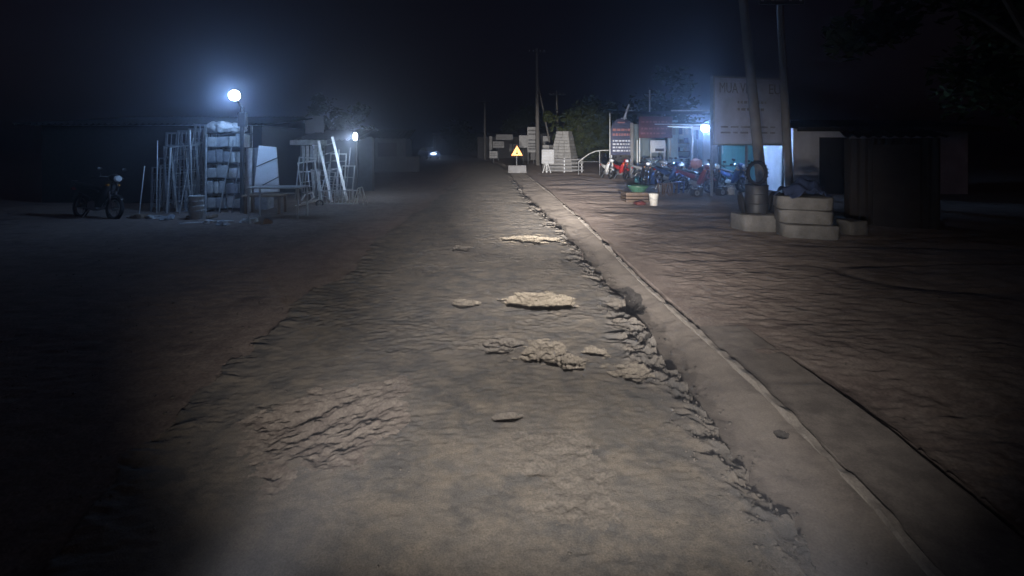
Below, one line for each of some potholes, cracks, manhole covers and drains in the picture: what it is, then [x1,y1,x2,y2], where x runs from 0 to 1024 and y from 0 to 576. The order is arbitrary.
pothole [479,334,525,363]
pothole [581,345,611,359]
pothole [497,291,579,311]
pothole [511,338,590,376]
pothole [499,233,567,246]
